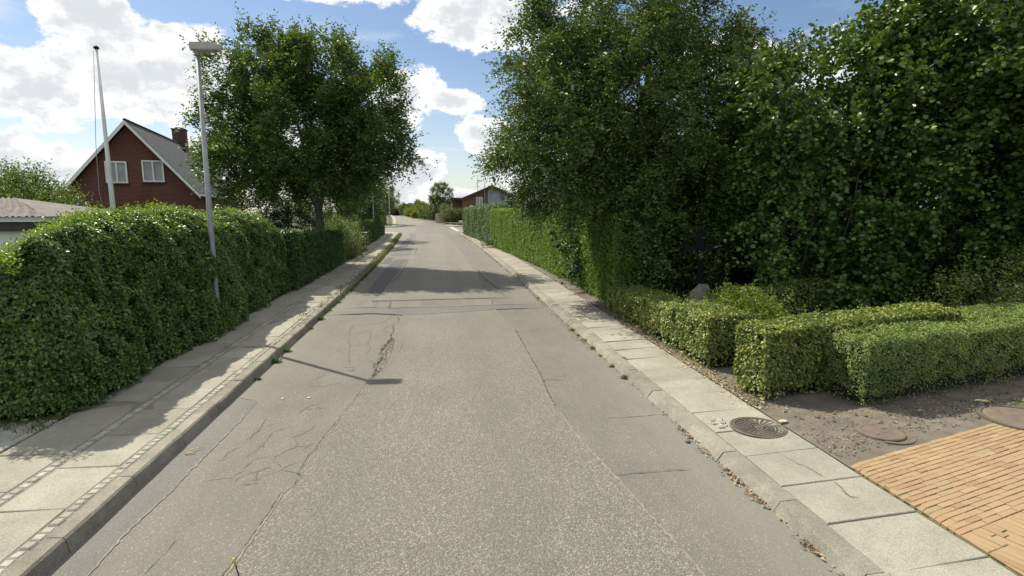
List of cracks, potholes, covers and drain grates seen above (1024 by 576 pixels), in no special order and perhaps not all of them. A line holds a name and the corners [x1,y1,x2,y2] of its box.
manhole cover [976,405,1024,431]
crack [87,268,505,576]
manhole cover [729,417,788,439]
manhole cover [856,423,916,445]
